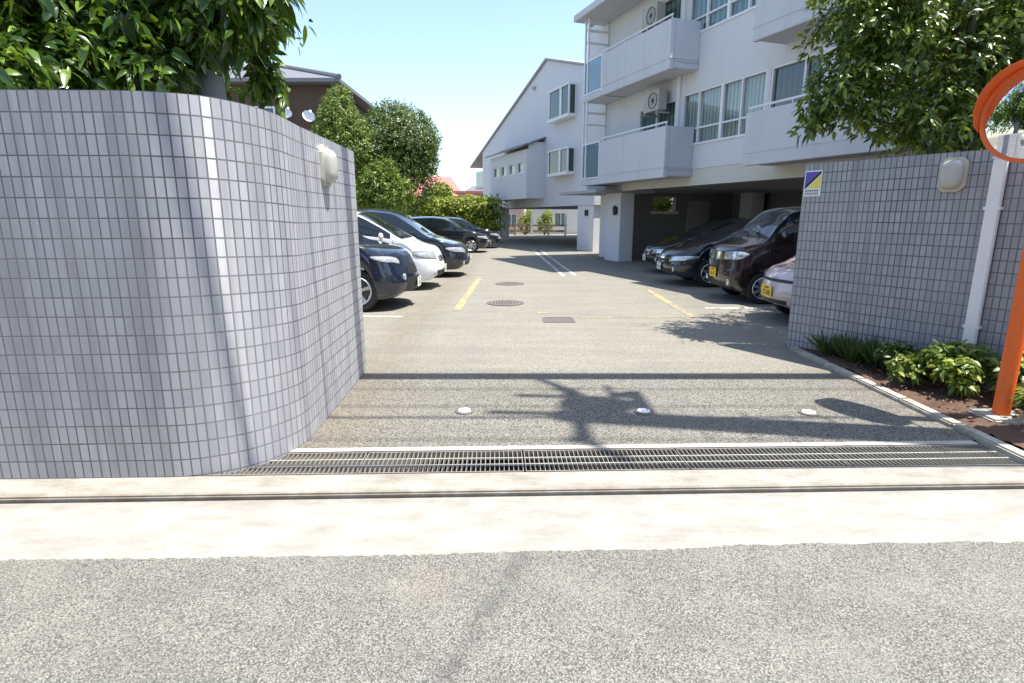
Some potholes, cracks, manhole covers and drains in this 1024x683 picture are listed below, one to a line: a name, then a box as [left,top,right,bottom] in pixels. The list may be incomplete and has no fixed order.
drain grate [205,452,367,476]
drain grate [825,445,1024,468]
drain grate [676,447,852,470]
drain grate [358,450,524,474]
drain grate [524,449,689,472]
